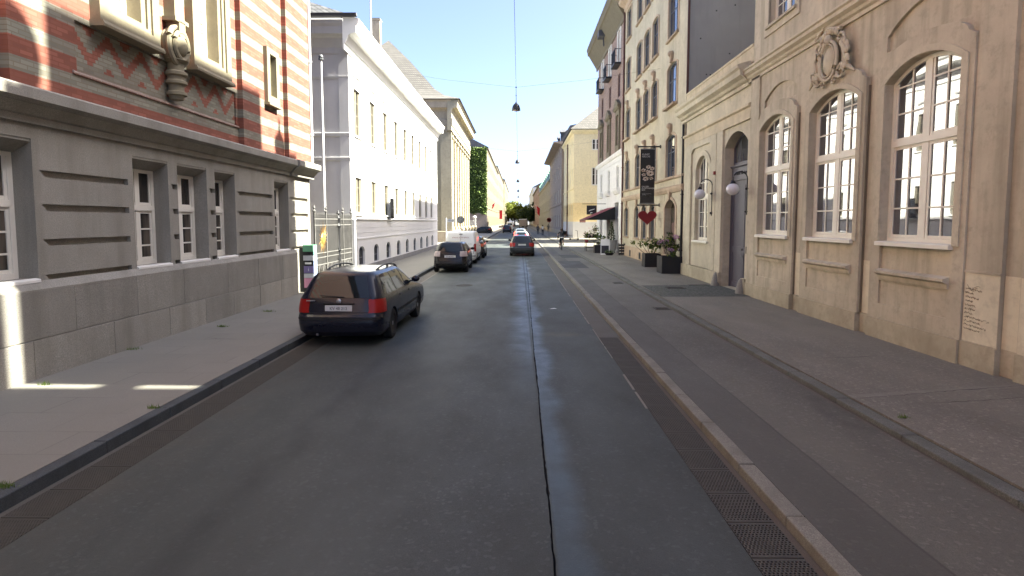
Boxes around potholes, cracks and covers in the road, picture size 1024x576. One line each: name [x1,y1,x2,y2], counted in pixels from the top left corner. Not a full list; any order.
drain grate [220,383,262,393]
drain grate [50,467,129,493]
drain grate [90,447,161,468]
drain grate [201,392,247,405]
drain grate [0,518,49,549]
drain grate [267,359,300,367]
drain grate [708,494,774,525]
drain grate [691,470,749,495]
drain grate [1,490,93,520]
drain grate [237,374,277,384]
drain grate [155,416,210,432]
drain grate [728,523,804,560]
